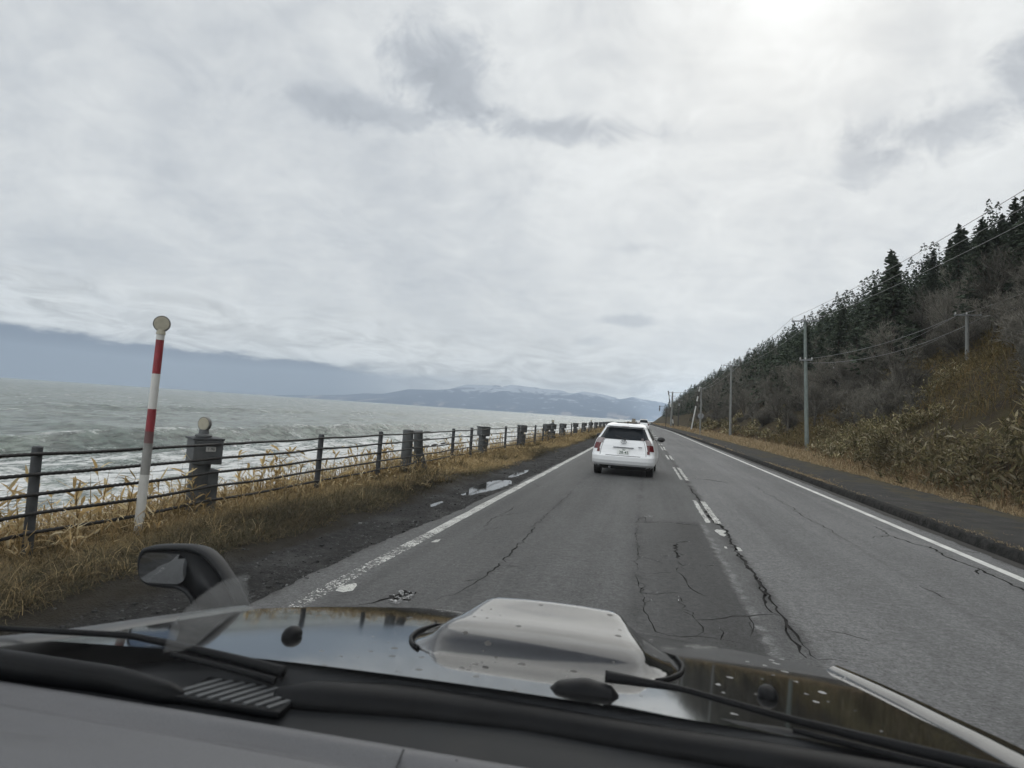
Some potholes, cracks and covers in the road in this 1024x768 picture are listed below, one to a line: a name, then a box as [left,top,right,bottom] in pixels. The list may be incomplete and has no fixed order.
crack [634,478,873,662]
crack [873,526,1024,590]
crack [352,488,574,606]
